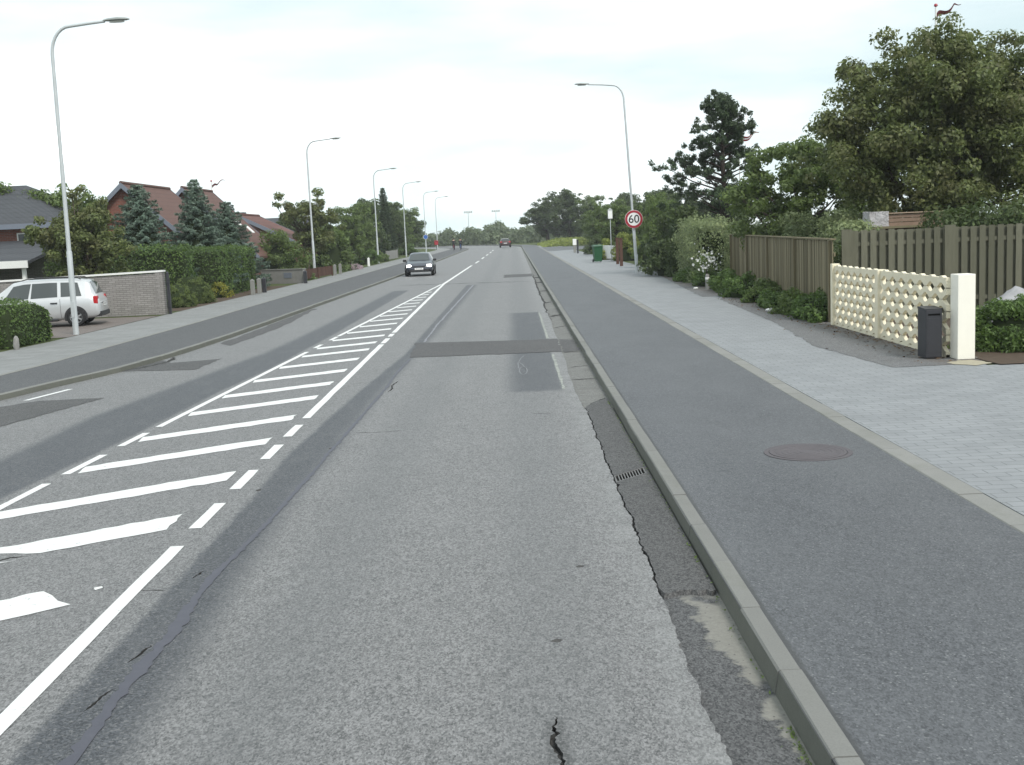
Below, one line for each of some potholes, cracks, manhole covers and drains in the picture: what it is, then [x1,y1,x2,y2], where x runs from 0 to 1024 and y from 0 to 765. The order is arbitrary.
crack [550,714,566,765]
manhole cover [764,443,853,461]
crack [83,689,113,712]
drain grate [614,467,646,482]
